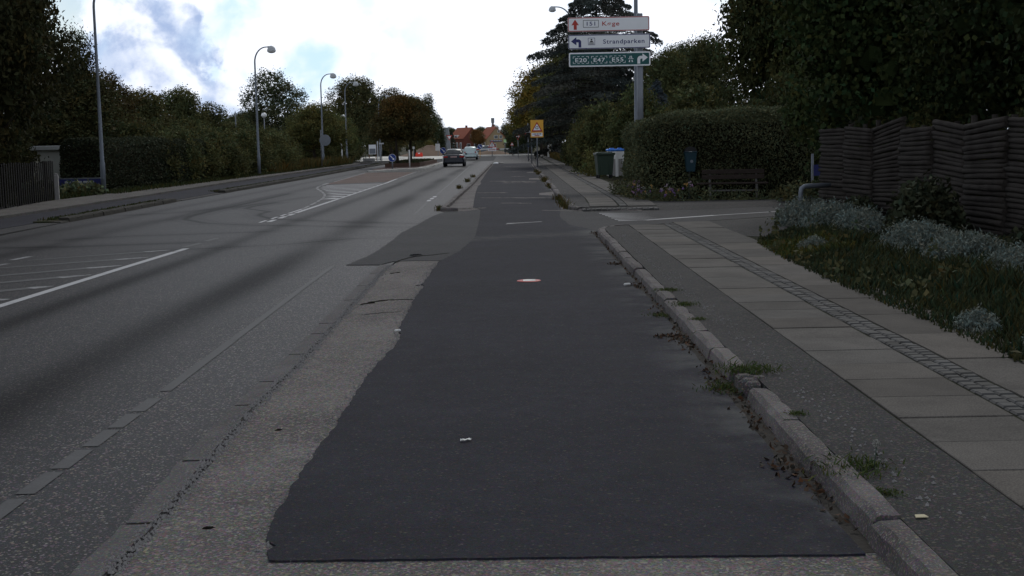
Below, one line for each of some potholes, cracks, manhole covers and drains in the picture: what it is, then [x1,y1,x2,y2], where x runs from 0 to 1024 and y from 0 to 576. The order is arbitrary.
crack [361,253,446,315]
